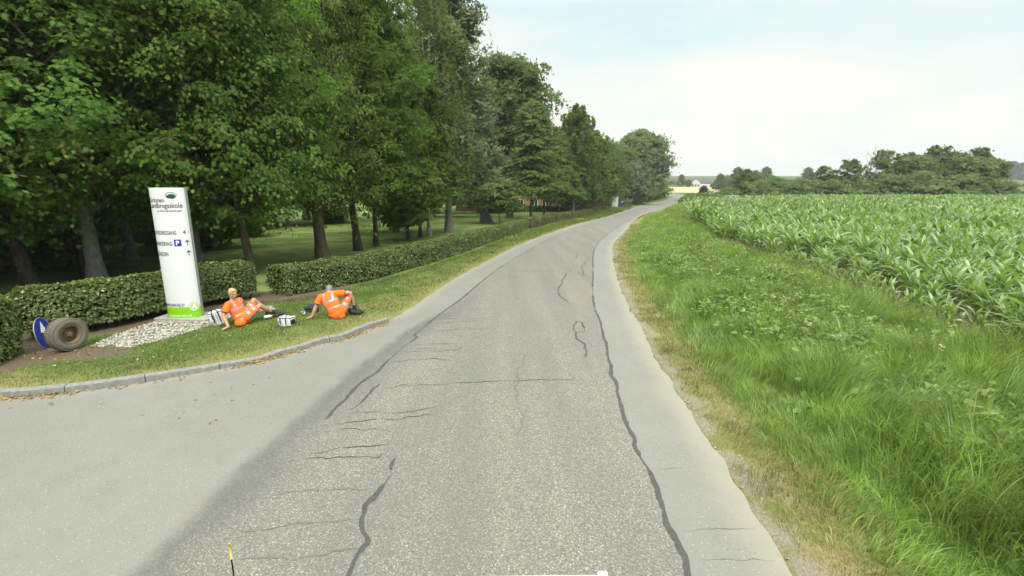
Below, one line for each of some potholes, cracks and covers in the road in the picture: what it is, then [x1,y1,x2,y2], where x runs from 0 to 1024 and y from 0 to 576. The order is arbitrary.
crack [365,354,570,436]
crack [391,315,491,363]
